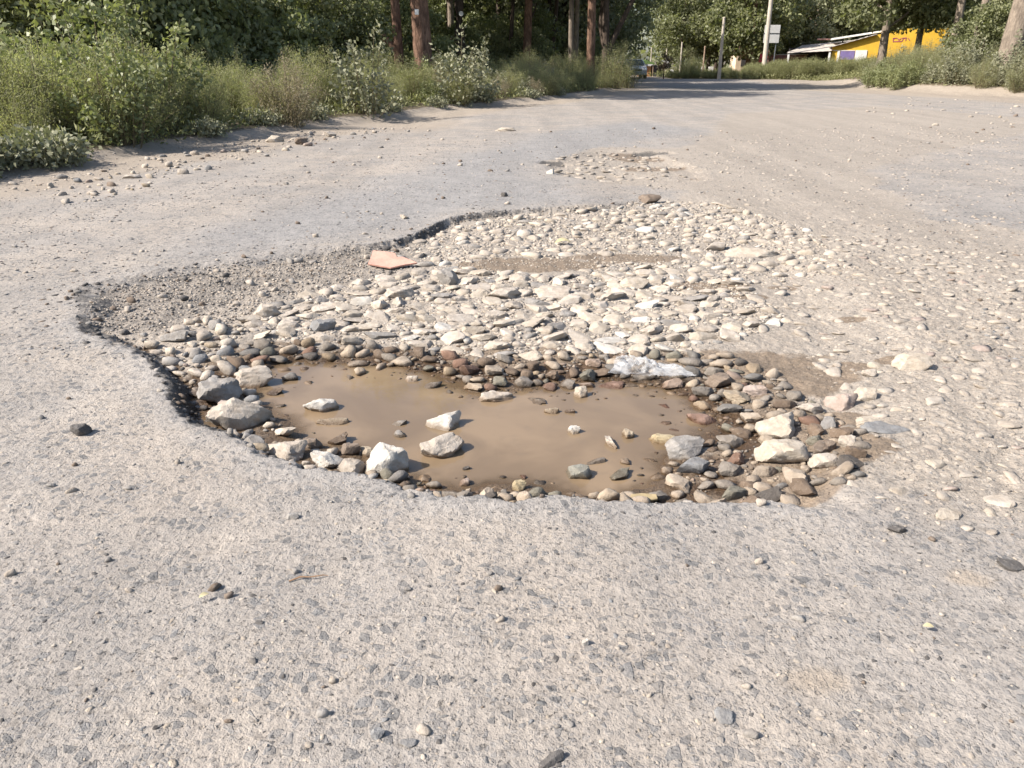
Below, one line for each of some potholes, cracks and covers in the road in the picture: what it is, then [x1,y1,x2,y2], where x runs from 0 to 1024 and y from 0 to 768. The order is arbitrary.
pothole [67,193,954,509]
pothole [546,150,711,184]
